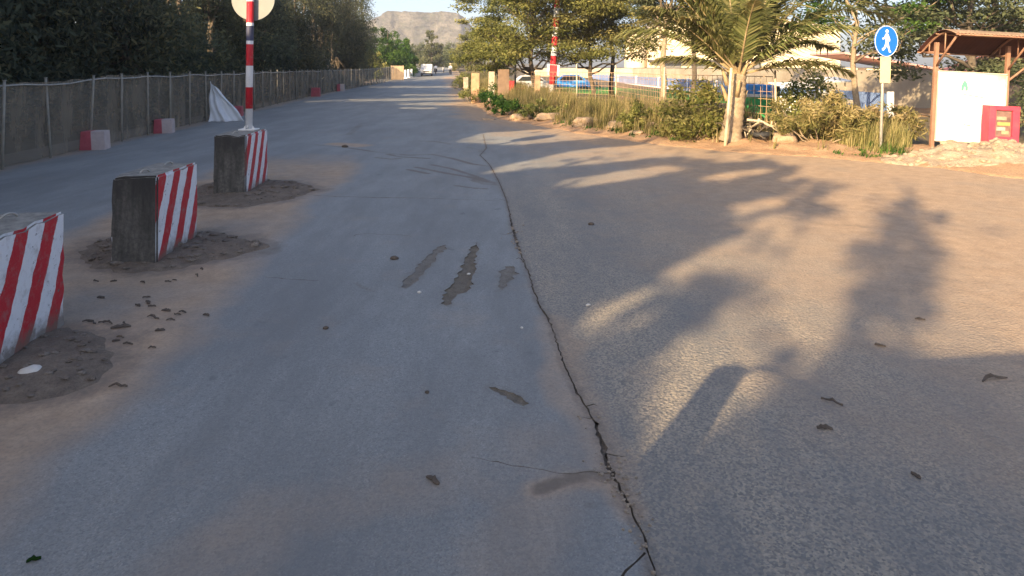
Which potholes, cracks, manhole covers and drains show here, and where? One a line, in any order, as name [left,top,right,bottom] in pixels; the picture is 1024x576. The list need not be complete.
crack [334,134,656,576]
